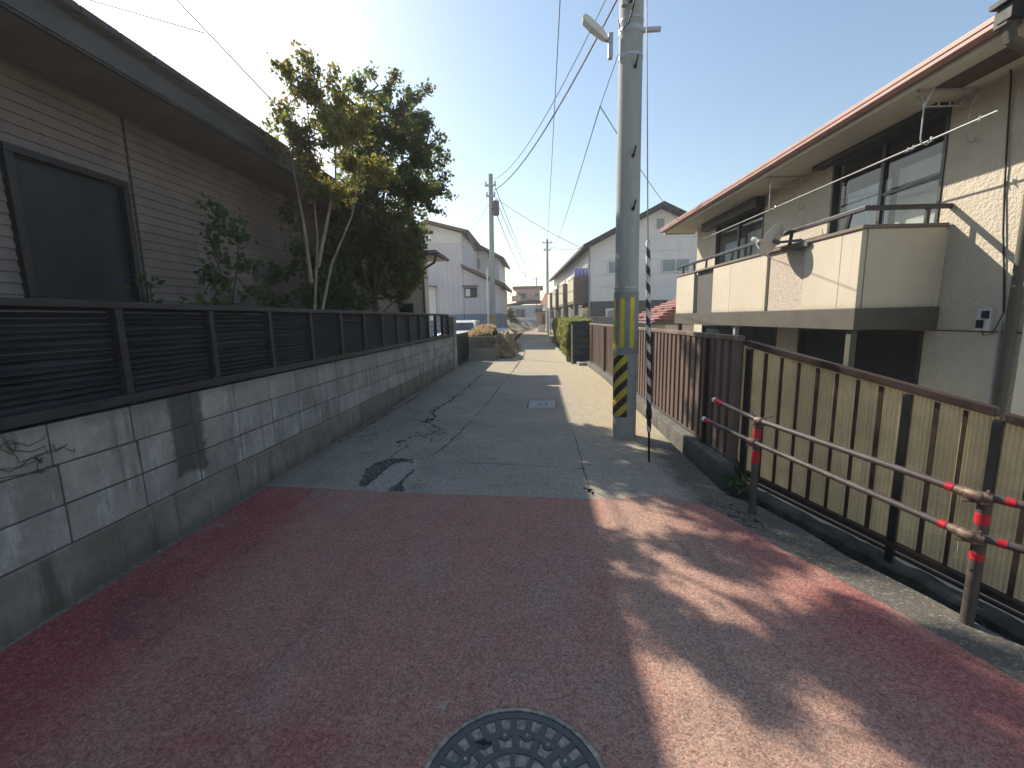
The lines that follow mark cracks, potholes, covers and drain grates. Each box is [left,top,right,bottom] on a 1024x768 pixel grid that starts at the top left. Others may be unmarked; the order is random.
manhole cover [527,401,557,409]
crack [337,353,559,468]
manhole cover [423,707,606,768]
crack [569,429,596,496]
